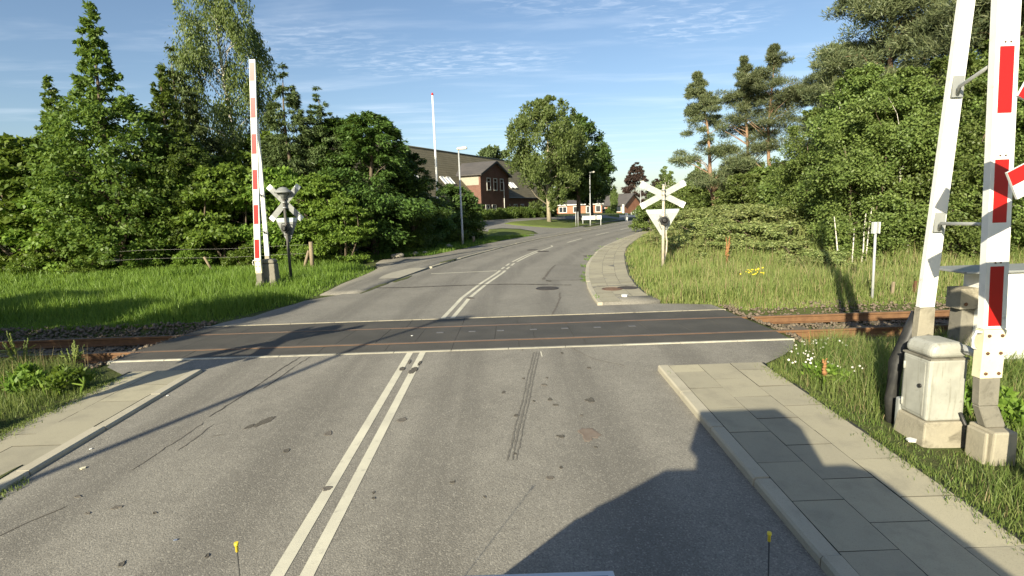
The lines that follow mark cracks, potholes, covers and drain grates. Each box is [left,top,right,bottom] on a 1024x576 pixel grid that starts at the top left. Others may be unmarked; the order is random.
crack [1,505,68,535]
crack [133,357,309,469]
